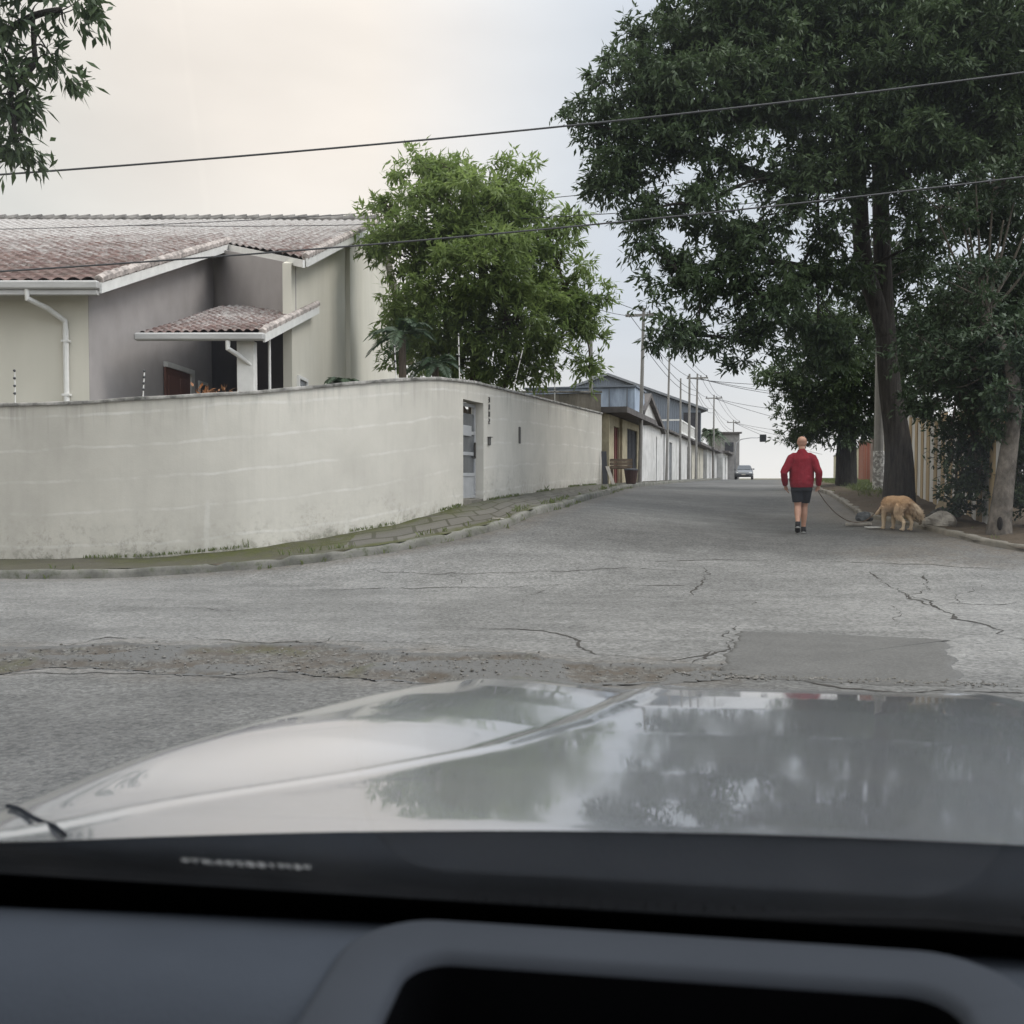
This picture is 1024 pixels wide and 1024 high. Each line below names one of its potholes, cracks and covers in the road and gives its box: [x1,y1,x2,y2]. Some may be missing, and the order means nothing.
crack [743,572,1021,639]
crack [41,626,1022,693]
crack [278,567,711,608]
pothole [0,641,738,686]
